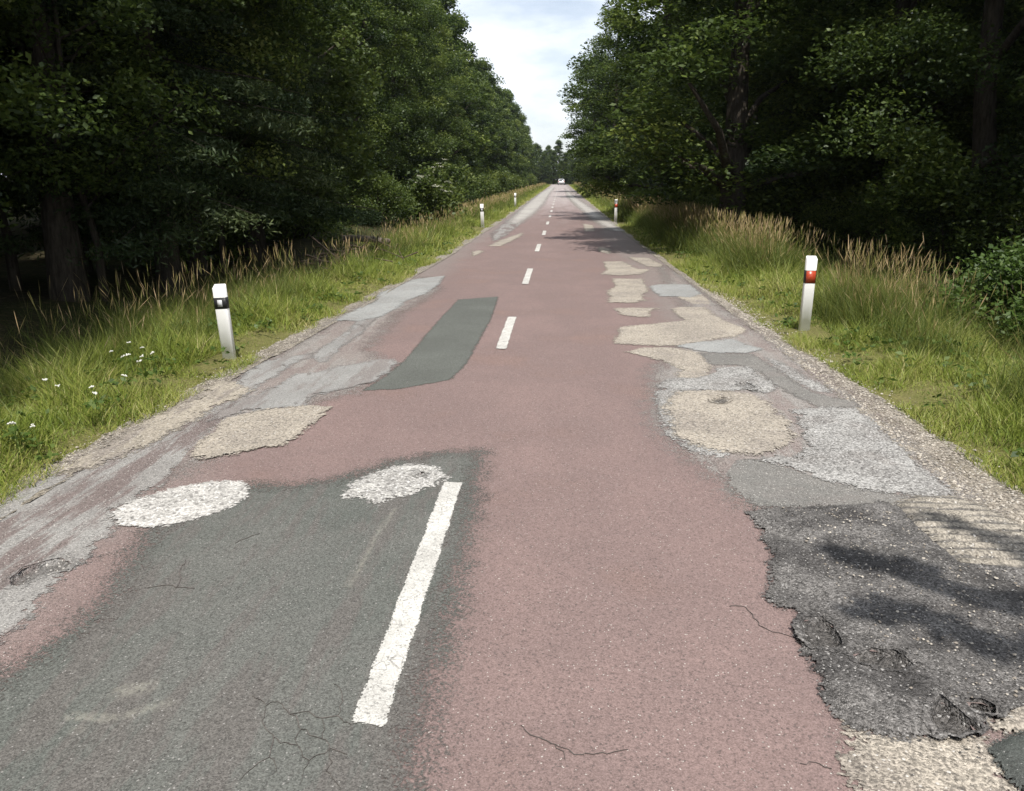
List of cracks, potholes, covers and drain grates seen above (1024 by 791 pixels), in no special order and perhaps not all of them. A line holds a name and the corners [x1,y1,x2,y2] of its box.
crack [241,683,351,787]
crack [521,725,628,756]
pothole [790,611,850,654]
pothole [918,686,990,740]
crack [731,605,794,638]
crack [147,559,189,588]
pothole [0,553,81,589]
pothole [958,692,1014,718]
